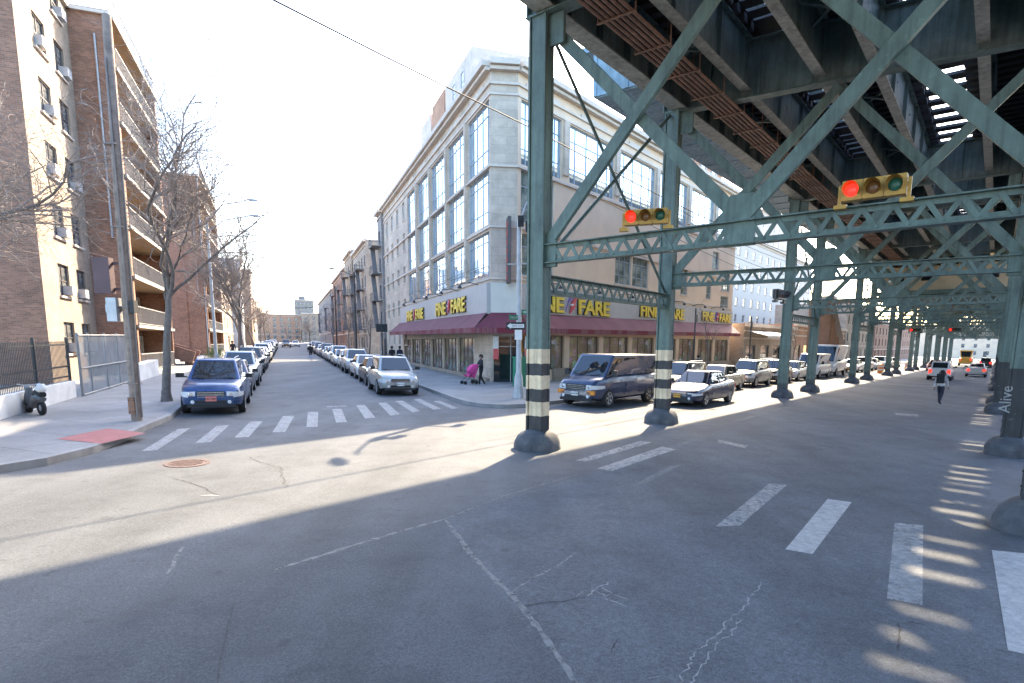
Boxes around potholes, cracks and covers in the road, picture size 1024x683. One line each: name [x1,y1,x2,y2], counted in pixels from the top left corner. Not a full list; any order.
crack [645,582,762,683]
crack [173,478,220,496]
crack [896,622,925,651]
crack [525,582,628,614]
manhole cover [163,459,210,468]
